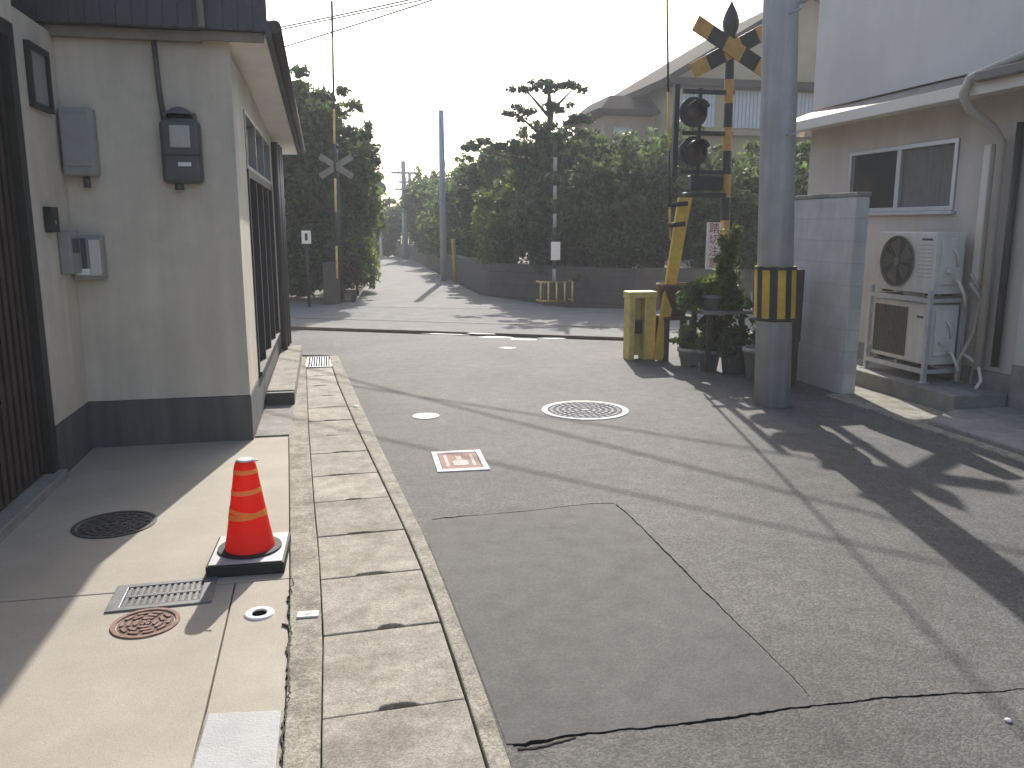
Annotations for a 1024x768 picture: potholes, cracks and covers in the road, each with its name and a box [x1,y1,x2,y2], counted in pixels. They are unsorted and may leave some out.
manhole cover [431,449,490,473]
manhole cover [71,510,157,539]
crack [279,575,295,763]
manhole cover [110,607,181,639]
manhole cover [541,401,629,420]
drain grate [306,356,333,373]
crack [513,688,1024,750]
drain grate [104,576,218,614]
